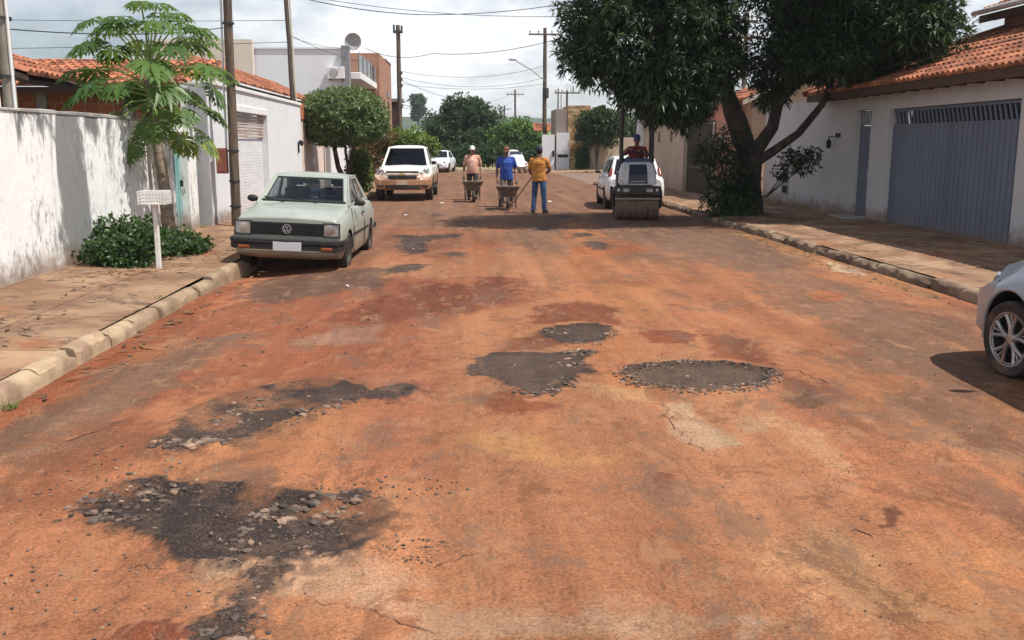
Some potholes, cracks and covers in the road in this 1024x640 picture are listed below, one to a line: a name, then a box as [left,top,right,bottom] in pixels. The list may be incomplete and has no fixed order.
crack [315,599,440,635]
